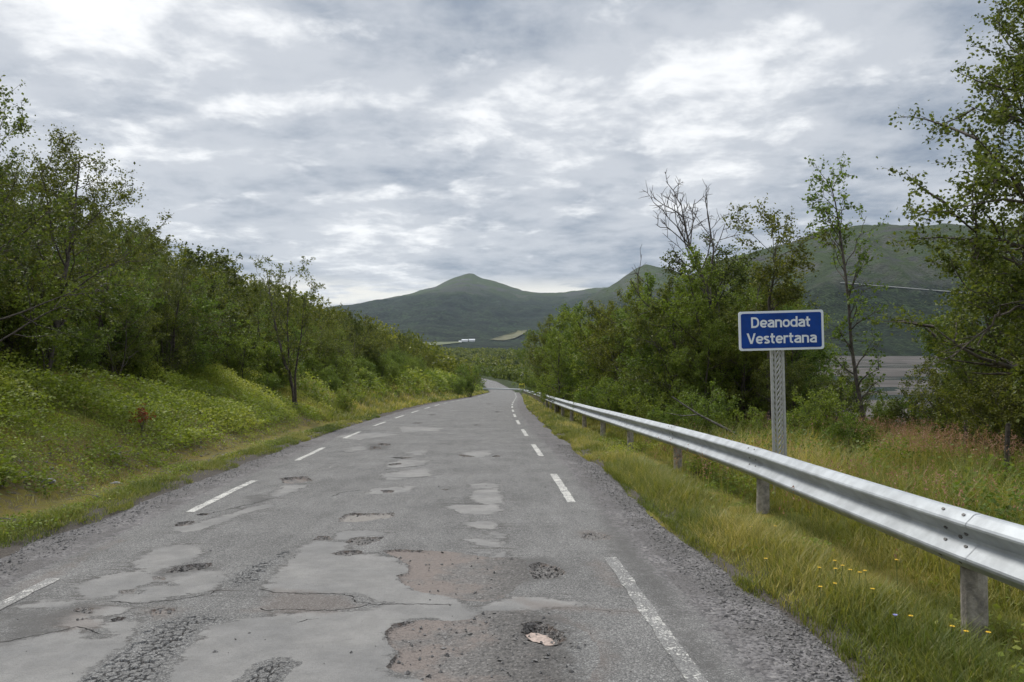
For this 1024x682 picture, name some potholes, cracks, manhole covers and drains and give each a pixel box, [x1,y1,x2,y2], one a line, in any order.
pothole [337,512,395,522]
pothole [163,563,213,573]
pothole [528,562,567,579]
pothole [345,536,384,546]
crack [1,548,448,682]
pothole [384,549,530,602]
pothole [385,610,600,682]
pothole [280,476,312,484]
